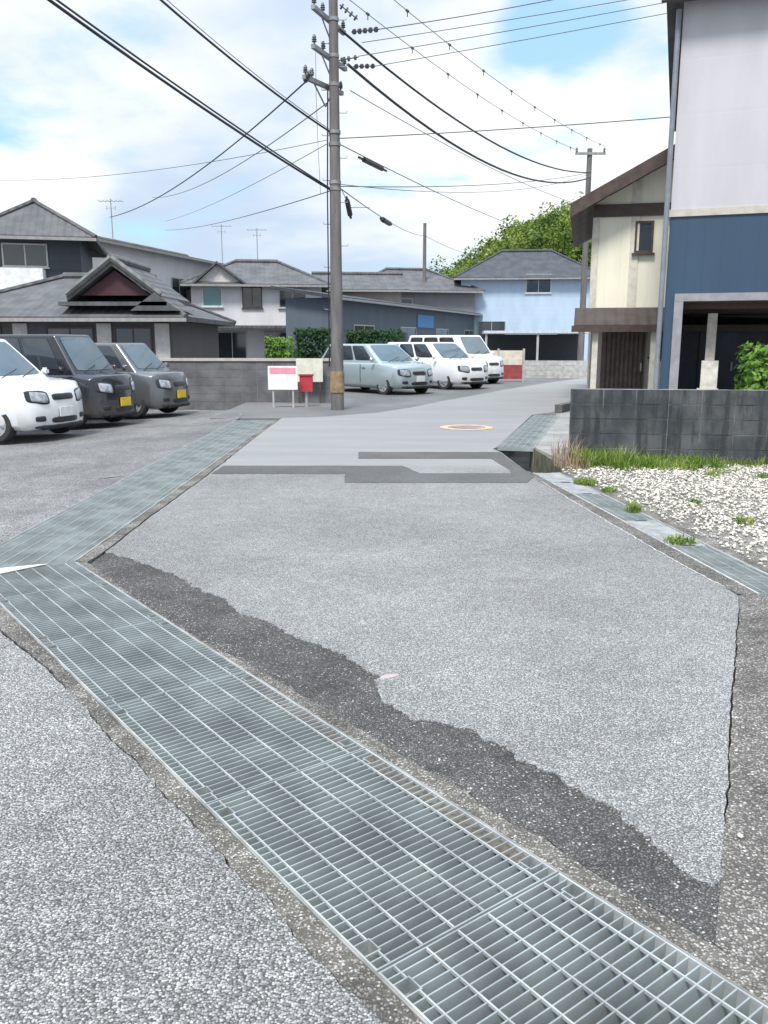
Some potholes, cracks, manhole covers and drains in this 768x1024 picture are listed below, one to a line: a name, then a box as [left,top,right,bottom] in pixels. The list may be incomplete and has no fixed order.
drain grate [102,476,194,491]
drain grate [0,535,111,568]
drain grate [206,749,558,973]
drain grate [0,562,105,598]
drain grate [577,494,626,507]
drain grate [674,546,751,568]
drain grate [498,440,538,452]
drain grate [713,567,768,595]
drain grate [189,437,249,445]
crack [724,614,739,819]
drain grate [18,511,145,535]
drain grate [0,581,164,644]
